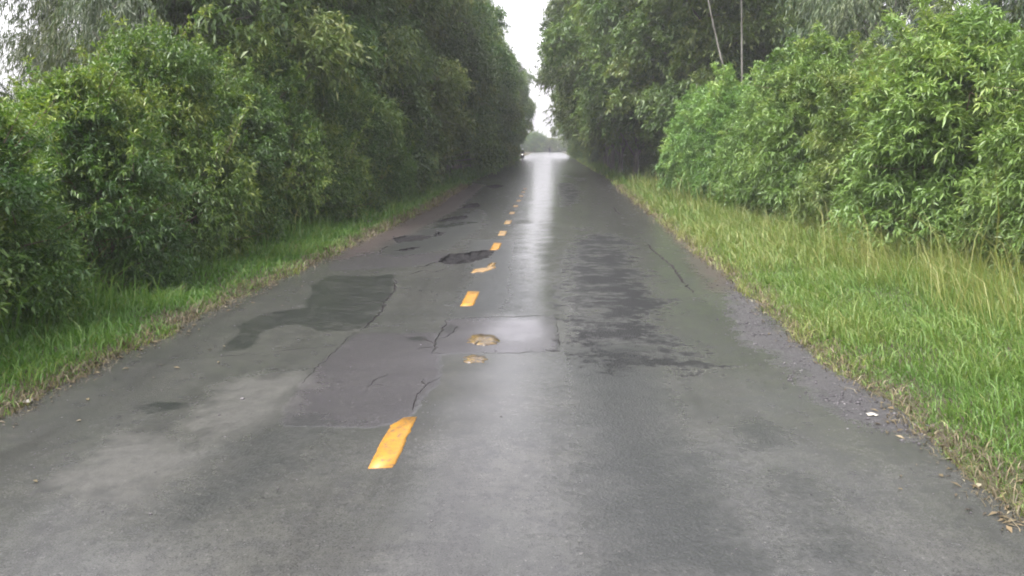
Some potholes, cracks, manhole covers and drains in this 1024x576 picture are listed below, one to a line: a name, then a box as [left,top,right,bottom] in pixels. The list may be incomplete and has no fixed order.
pothole [393,235,433,243]
crack [648,244,694,293]
crack [412,378,439,410]
pothole [438,250,496,264]
crack [217,262,443,382]
